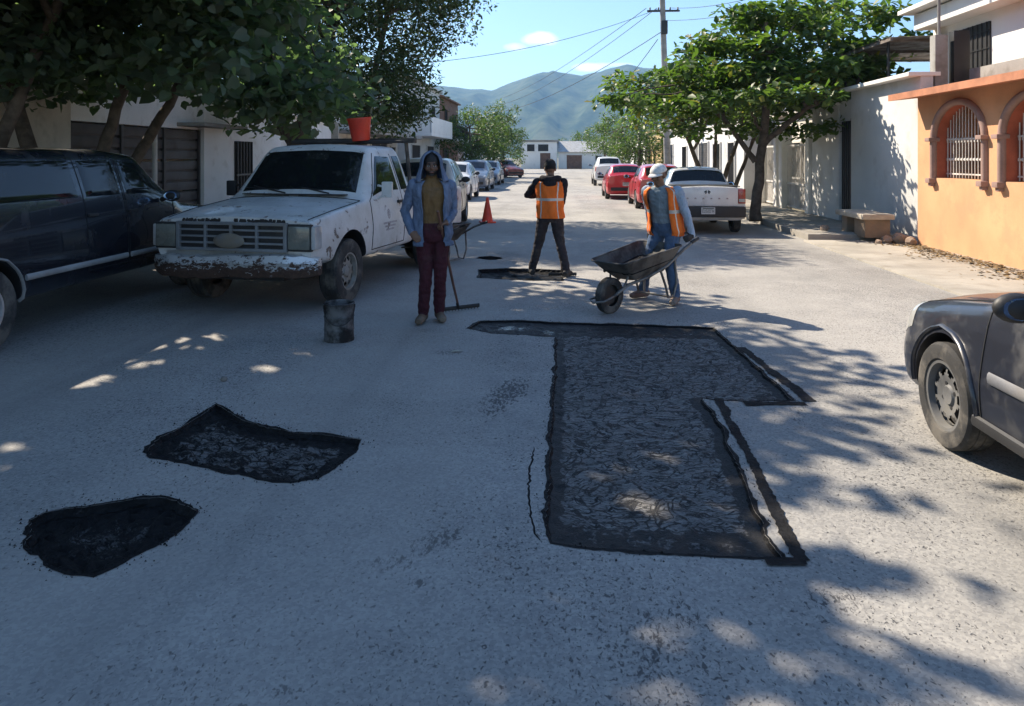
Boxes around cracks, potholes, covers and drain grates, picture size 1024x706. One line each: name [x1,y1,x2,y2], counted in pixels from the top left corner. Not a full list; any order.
crack [527,448,545,540]
pothole [477,268,565,281]
pothole [139,402,375,486]
pothole [464,319,816,578]
pothole [9,482,214,581]
